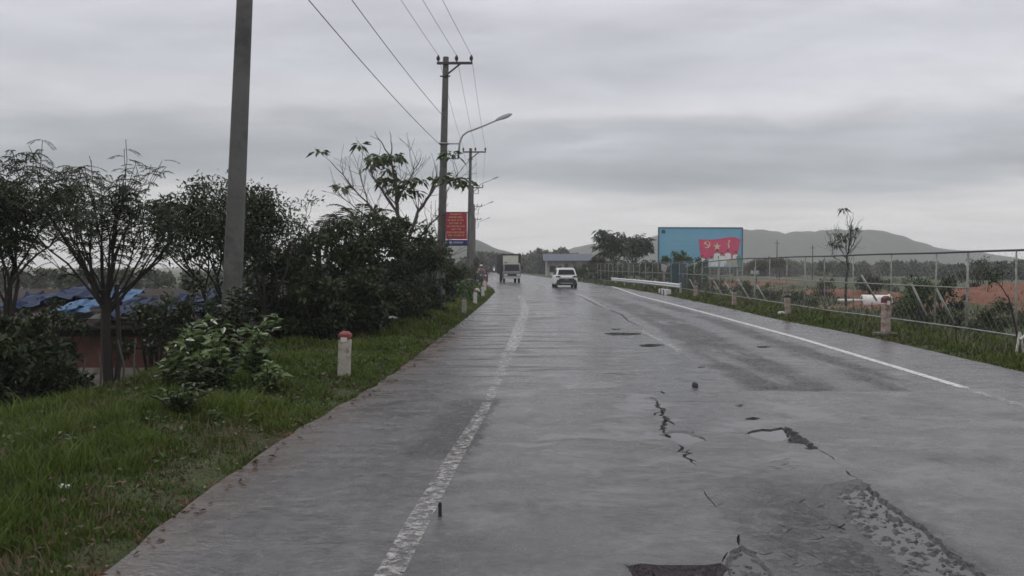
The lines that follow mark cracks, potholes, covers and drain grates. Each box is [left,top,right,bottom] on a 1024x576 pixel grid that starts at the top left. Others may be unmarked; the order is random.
crack [649,391,696,465]
crack [722,495,845,568]
pothole [784,426,818,450]
pothole [820,479,986,576]
pothole [745,427,790,442]
pothole [625,563,729,576]
